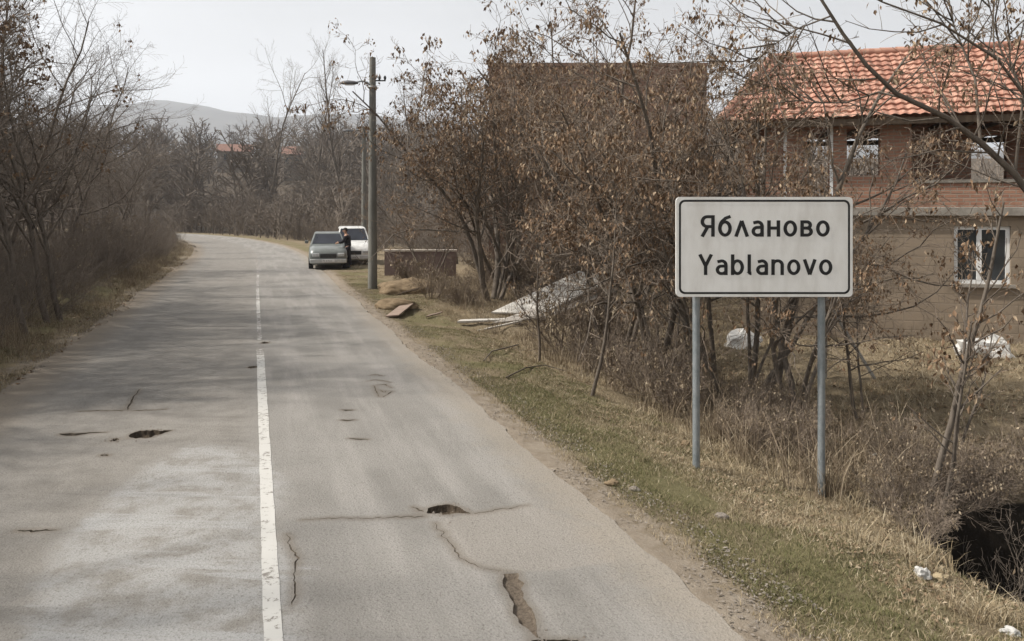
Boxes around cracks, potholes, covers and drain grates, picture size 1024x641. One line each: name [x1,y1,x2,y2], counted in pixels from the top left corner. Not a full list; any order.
pothole [427,504,469,515]
pothole [129,430,172,438]
crack [286,507,501,605]
crack [95,389,163,411]
